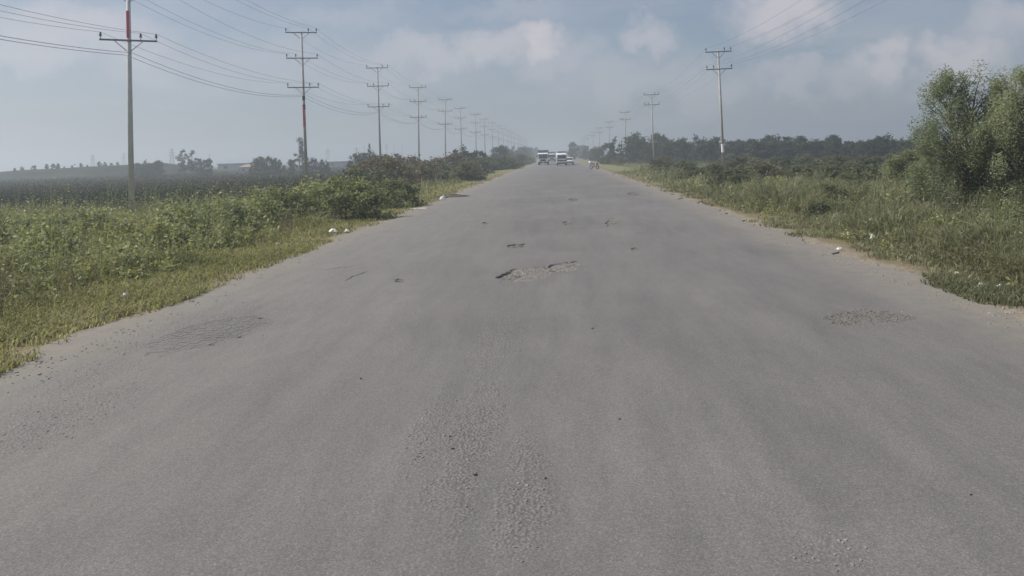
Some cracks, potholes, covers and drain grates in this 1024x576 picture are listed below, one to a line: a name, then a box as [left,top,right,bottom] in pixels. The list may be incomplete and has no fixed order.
pothole [824,309,919,326]
pothole [544,261,580,272]
pothole [496,266,553,282]
